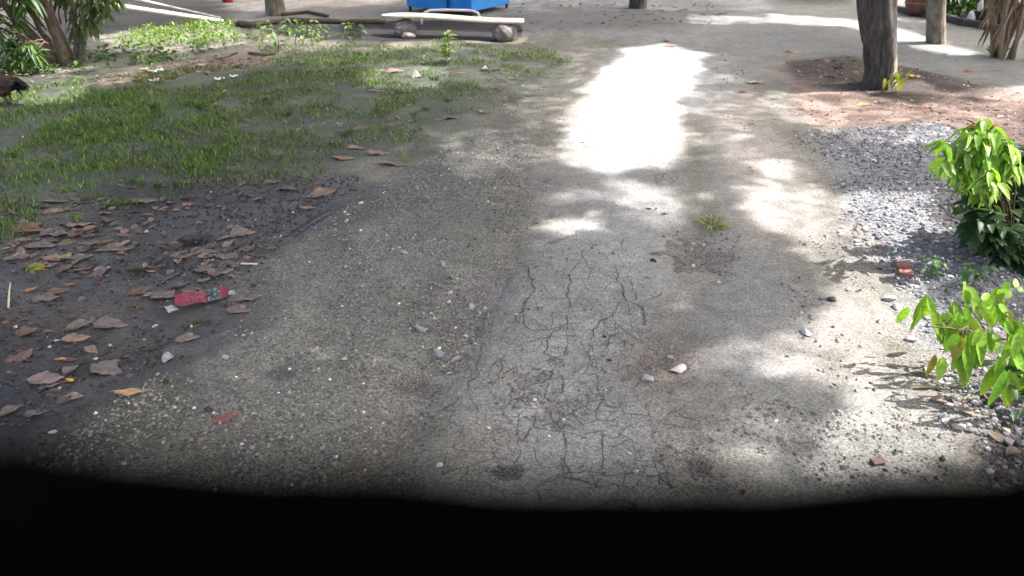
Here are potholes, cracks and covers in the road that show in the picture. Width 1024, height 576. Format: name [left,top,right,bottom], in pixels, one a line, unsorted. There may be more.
crack [421,231,715,470]
